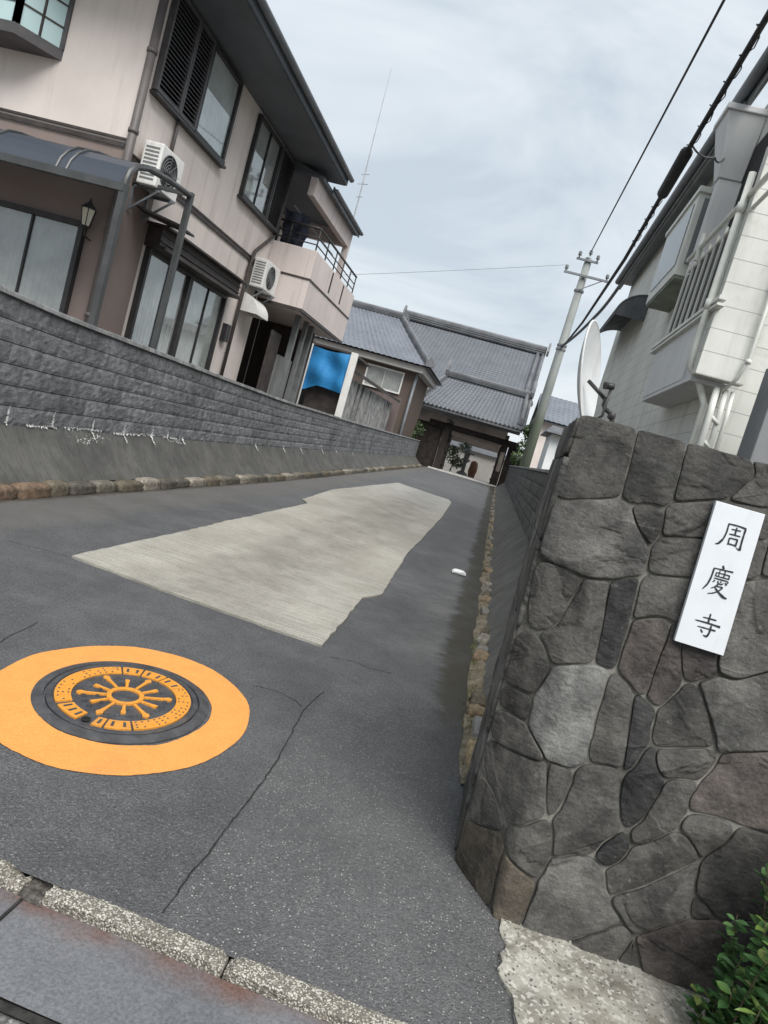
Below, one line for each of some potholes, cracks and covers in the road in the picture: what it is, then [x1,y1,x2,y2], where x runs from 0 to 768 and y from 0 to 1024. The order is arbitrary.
crack [162,685,324,913]
crack [331,657,392,674]
crack [0,622,38,643]
manhole cover [31,661,209,745]
